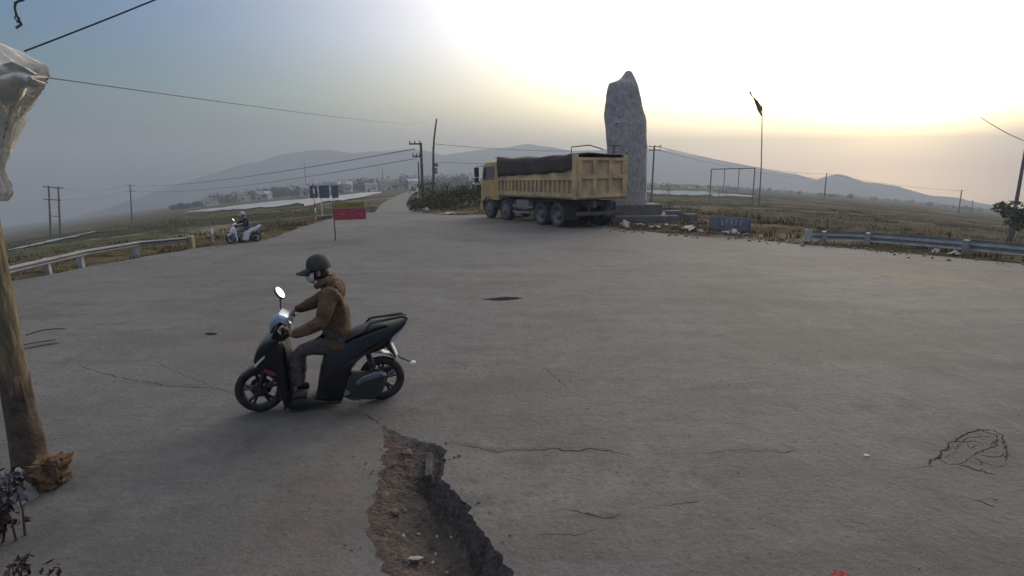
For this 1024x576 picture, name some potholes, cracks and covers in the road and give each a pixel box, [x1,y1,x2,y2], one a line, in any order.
crack [449,442,632,457]
pothole [365,426,514,576]
crack [80,361,235,396]
crack [921,429,1009,475]
crack [542,510,621,536]
